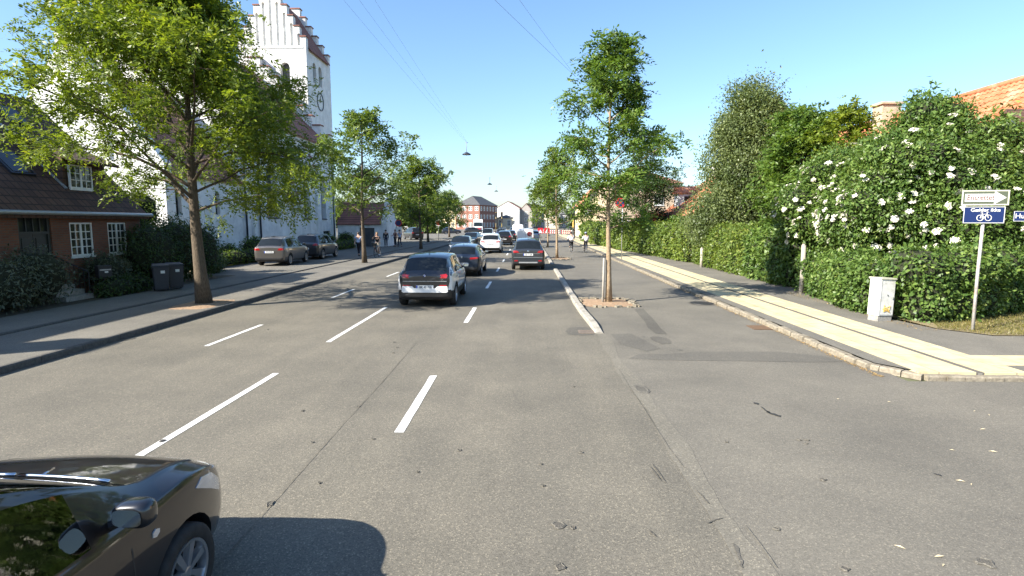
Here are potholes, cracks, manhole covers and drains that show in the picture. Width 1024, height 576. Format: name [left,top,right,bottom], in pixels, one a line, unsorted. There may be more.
crack [733,526,777,568]
